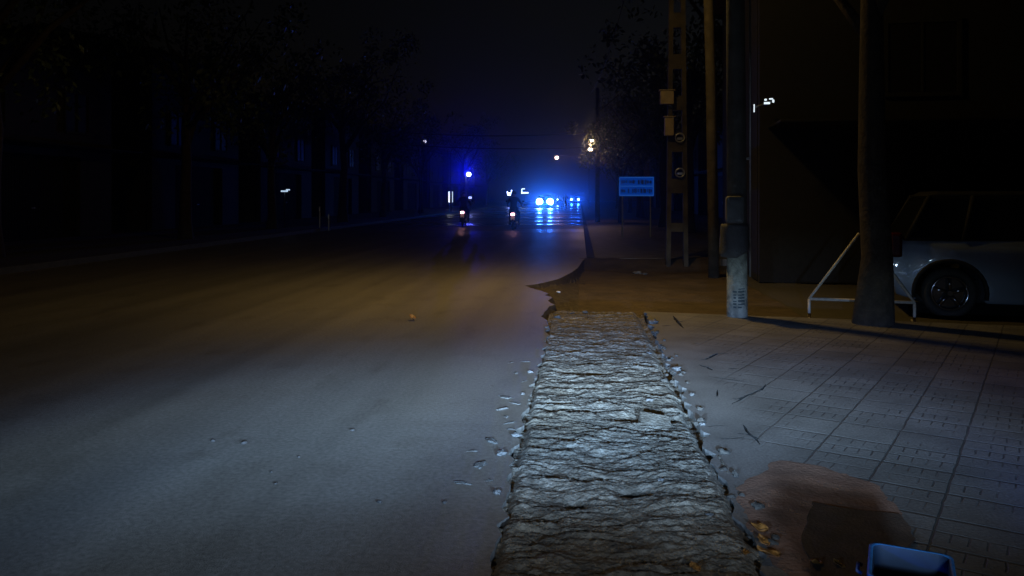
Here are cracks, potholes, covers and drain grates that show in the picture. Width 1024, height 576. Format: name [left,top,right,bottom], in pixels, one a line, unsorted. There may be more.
crack [719,425,760,445]
crack [700,353,766,404]
